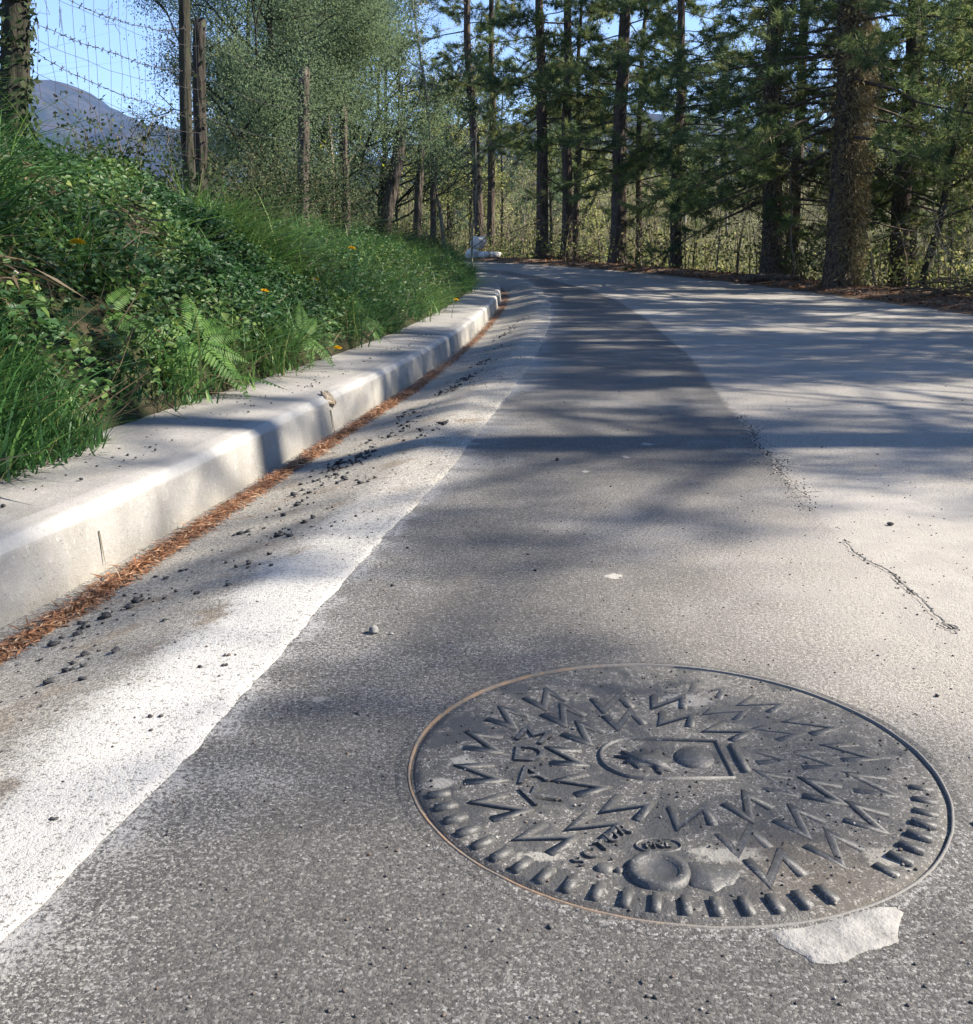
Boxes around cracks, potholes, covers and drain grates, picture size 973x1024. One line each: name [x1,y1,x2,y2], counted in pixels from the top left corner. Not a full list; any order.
crack [837,538,960,634]
crack [726,414,833,511]
manhole cover [395,661,969,941]
